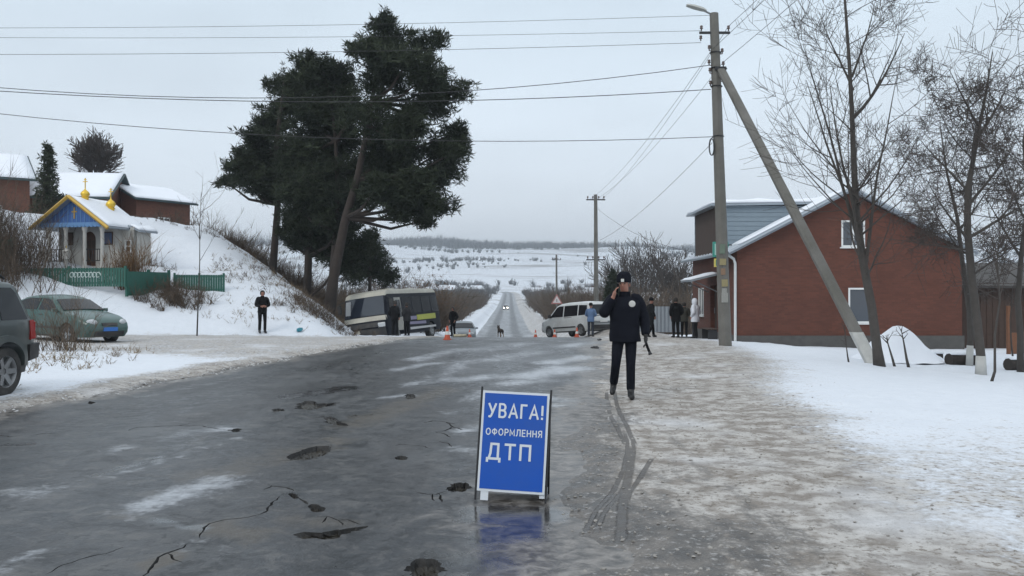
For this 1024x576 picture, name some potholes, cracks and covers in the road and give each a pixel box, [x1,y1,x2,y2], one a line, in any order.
pothole [404,558,448,576]
pothole [294,401,336,410]
crack [143,484,361,576]
crack [396,421,462,449]
pothole [287,446,331,460]
pothole [446,482,472,492]
pothole [293,526,368,540]
pothole [308,504,326,512]
pothole [324,417,348,426]
